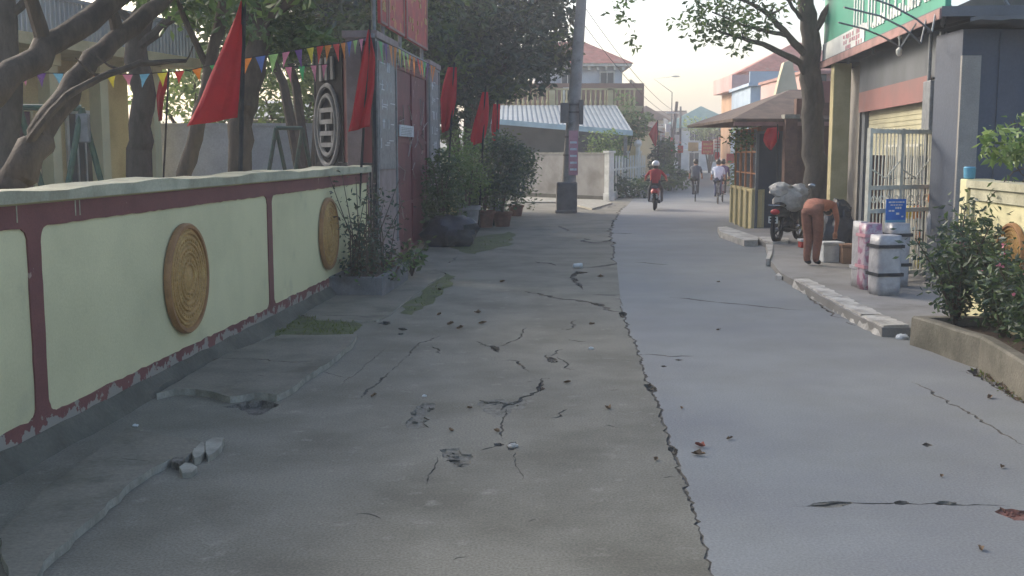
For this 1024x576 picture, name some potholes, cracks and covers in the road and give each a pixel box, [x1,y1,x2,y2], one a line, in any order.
crack [326,323,441,399]
pothole [405,402,436,429]
pothole [223,400,279,416]
crack [426,457,465,485]
crack [477,262,625,478]
pothole [440,448,473,468]
